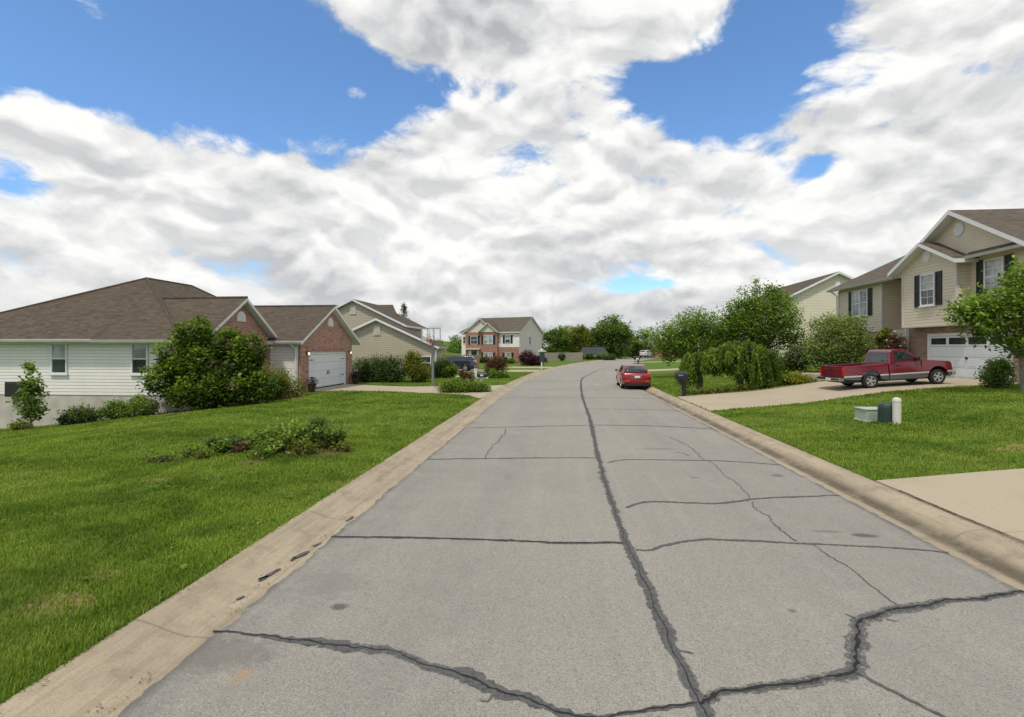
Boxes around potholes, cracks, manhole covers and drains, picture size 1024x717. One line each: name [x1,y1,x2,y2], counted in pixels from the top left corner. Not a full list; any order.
crack [698,545,1024,717]
